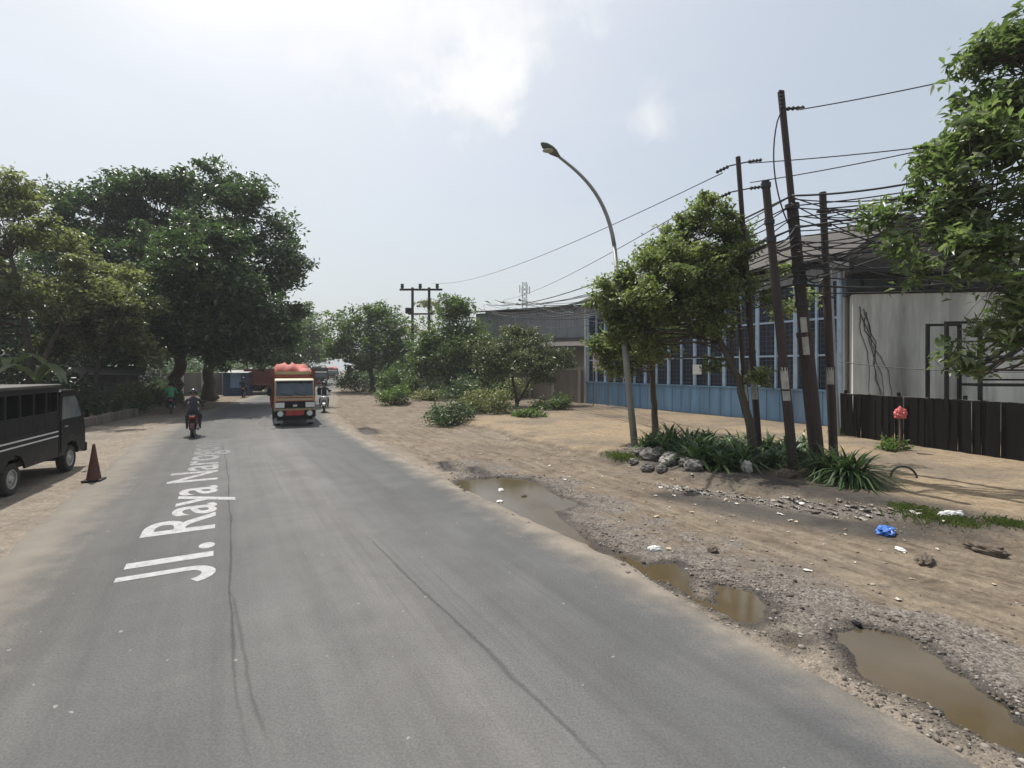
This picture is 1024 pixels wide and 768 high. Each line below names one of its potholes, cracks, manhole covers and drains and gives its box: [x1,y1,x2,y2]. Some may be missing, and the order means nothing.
pothole [451,476,624,560]
pothole [615,549,778,629]
pothole [823,623,1024,766]
